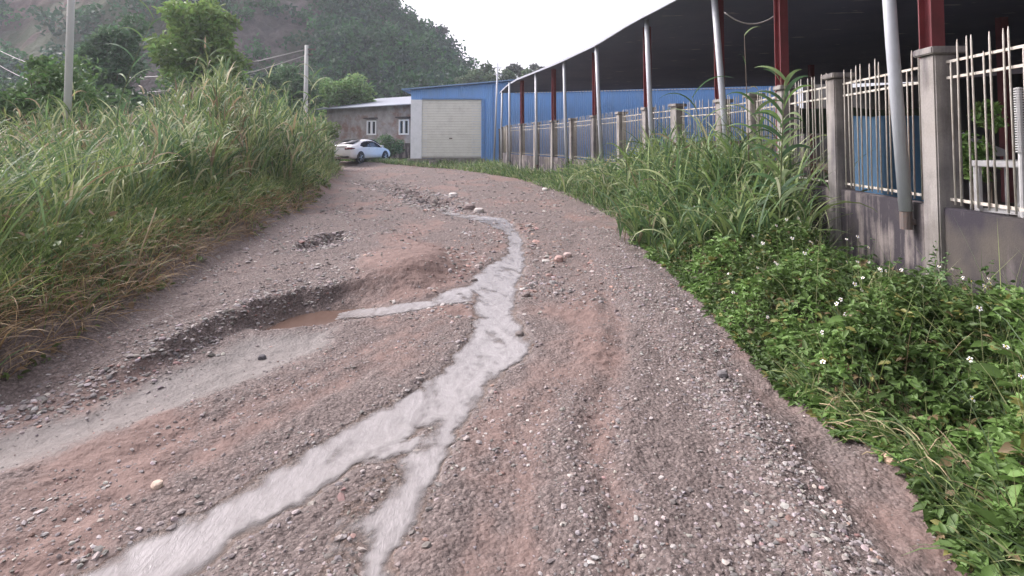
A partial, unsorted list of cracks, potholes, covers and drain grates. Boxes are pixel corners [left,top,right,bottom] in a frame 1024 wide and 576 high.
pothole [289,229,355,253]
pothole [237,293,381,332]
